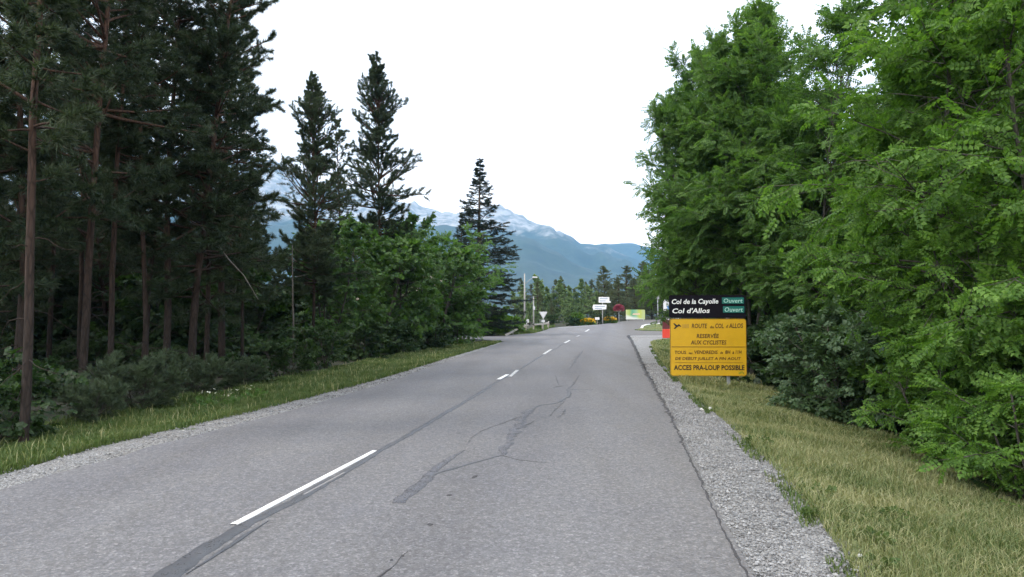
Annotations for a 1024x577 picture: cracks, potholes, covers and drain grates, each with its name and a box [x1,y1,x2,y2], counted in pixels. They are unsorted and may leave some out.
crack [466,374,593,445]
